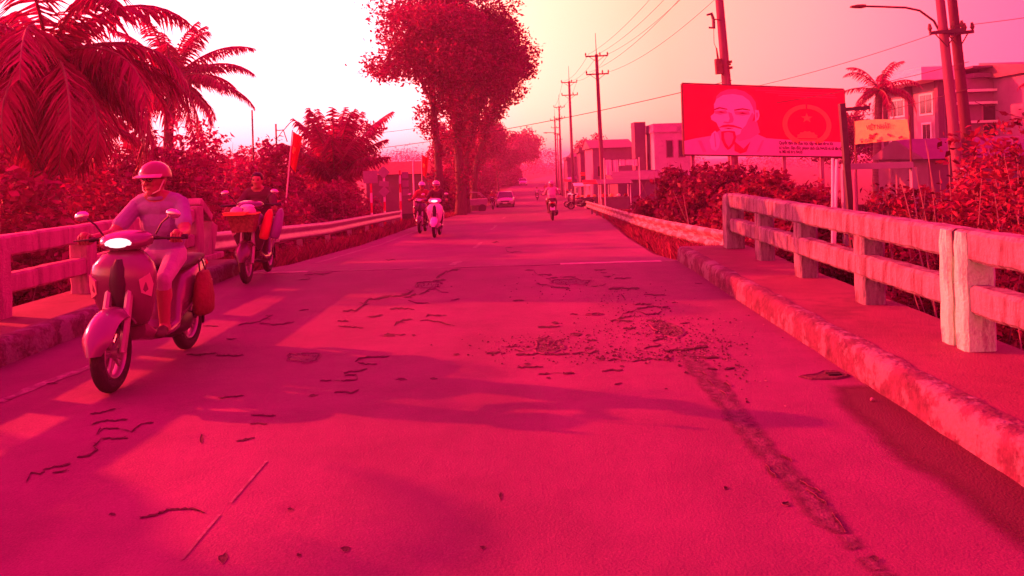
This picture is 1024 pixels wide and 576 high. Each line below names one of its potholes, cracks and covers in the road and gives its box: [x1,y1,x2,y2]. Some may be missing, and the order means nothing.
pothole [286,353,322,364]
crack [236,414,276,442]
crack [186,309,309,356]
crack [139,507,205,518]
crack [26,408,154,482]
pothole [533,339,566,354]
pothole [649,322,686,339]
crack [320,355,388,393]
crack [338,268,458,335]
